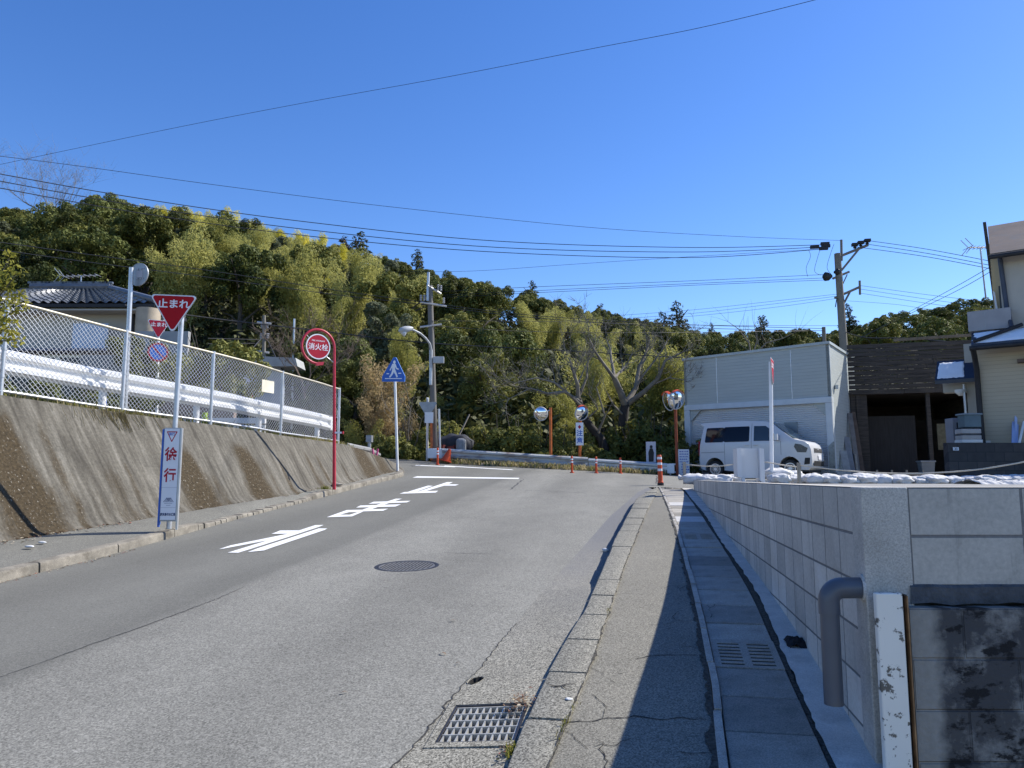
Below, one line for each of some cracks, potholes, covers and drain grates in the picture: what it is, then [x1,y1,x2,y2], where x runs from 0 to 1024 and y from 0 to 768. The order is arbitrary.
manhole cover [374,560,439,572]
drain grate [424,699,530,749]
crack [565,646,701,768]
